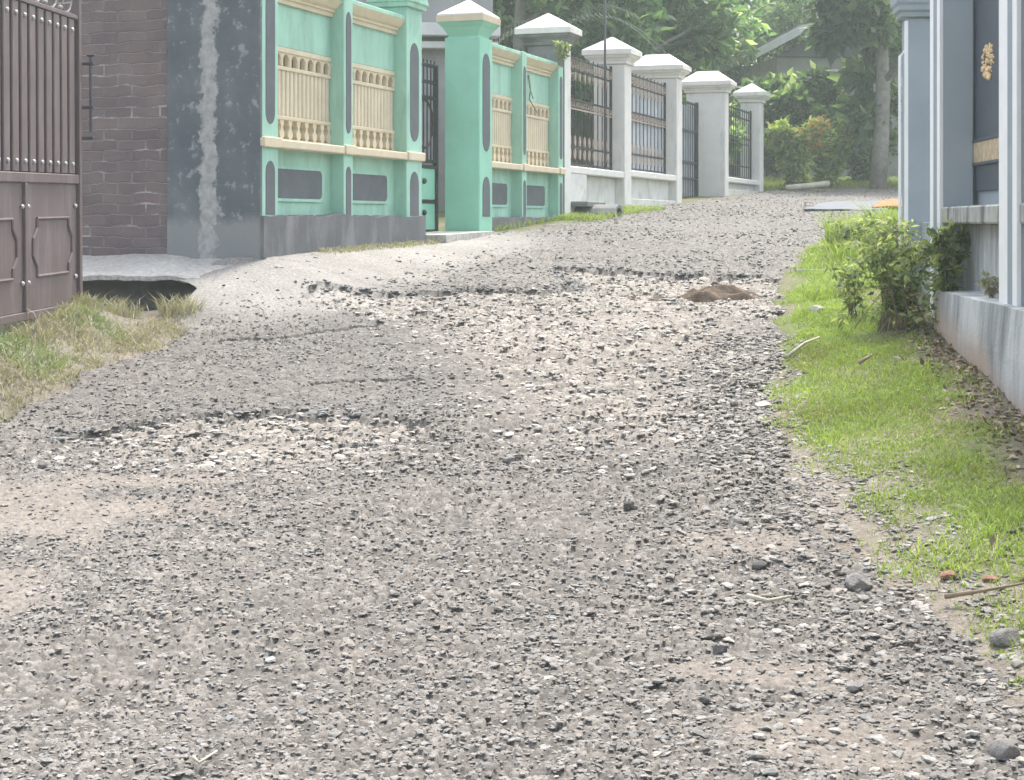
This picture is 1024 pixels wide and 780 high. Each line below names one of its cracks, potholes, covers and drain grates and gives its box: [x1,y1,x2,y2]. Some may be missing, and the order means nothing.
pothole [294,265,792,480]
